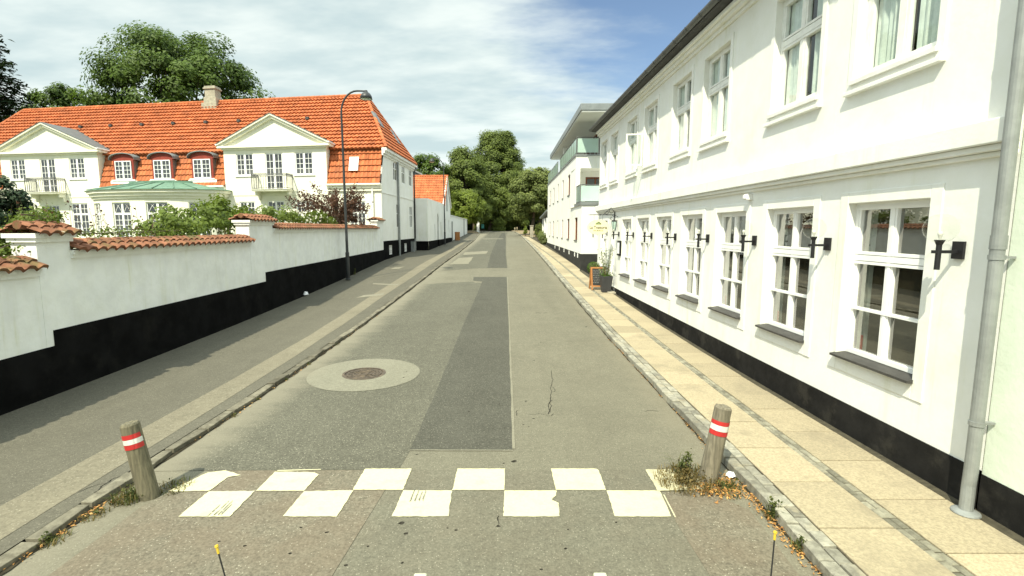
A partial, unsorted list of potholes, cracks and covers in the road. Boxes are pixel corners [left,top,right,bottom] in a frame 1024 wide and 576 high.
manhole cover [342,367,386,380]
crack [499,370,555,416]
